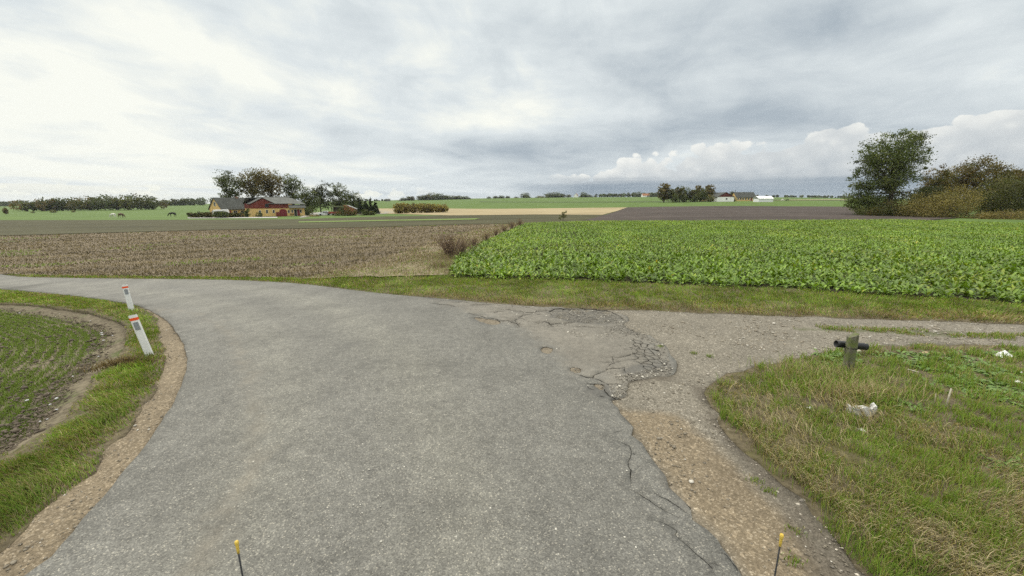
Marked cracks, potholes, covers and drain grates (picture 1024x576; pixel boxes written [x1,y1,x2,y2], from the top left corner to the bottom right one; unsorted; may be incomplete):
pothole [474,317,501,325]
crack [615,432,735,572]
crack [577,341,660,400]
